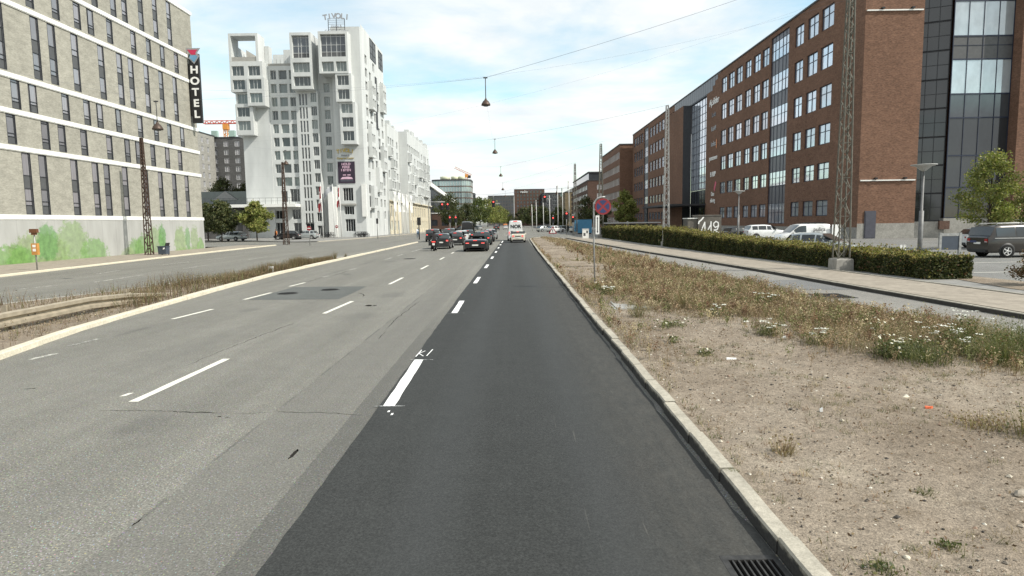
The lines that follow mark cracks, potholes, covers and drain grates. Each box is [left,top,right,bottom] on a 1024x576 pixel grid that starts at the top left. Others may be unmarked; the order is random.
crack [103,410,354,418]
drain grate [719,555,792,576]
